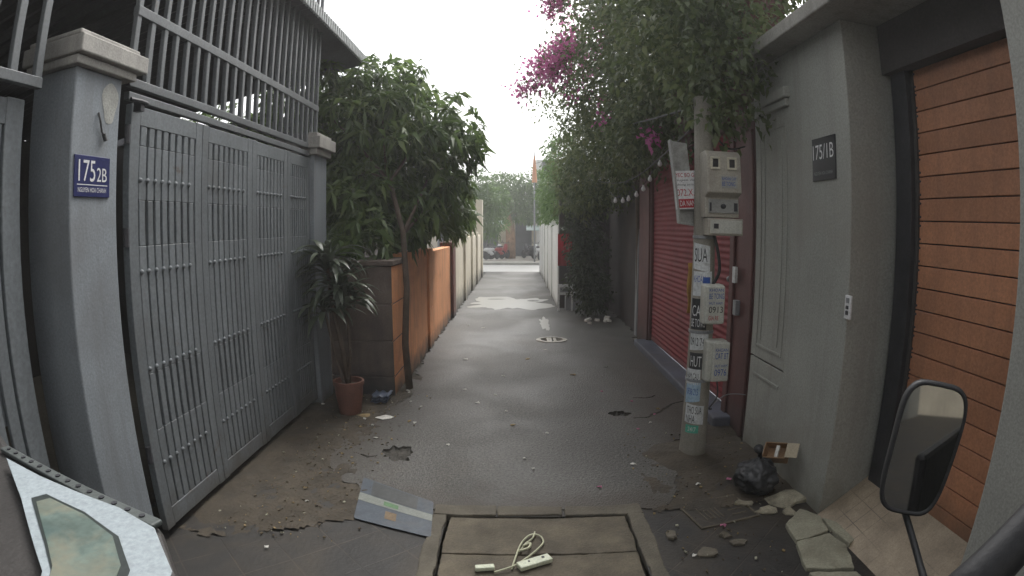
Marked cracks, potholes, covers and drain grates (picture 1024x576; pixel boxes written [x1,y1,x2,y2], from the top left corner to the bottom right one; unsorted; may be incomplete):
utility cover [680,494,760,530]
pothole [361,445,413,461]
crack [636,395,683,418]
